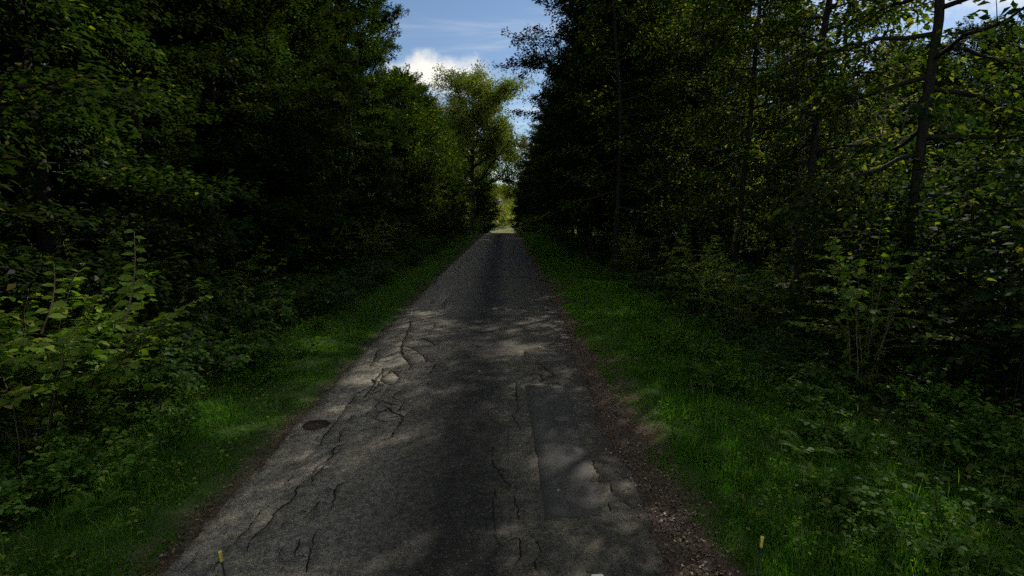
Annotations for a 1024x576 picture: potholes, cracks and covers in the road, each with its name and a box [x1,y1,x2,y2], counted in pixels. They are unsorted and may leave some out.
crack [512,352,557,424]
crack [212,321,436,573]
crack [491,448,541,571]
